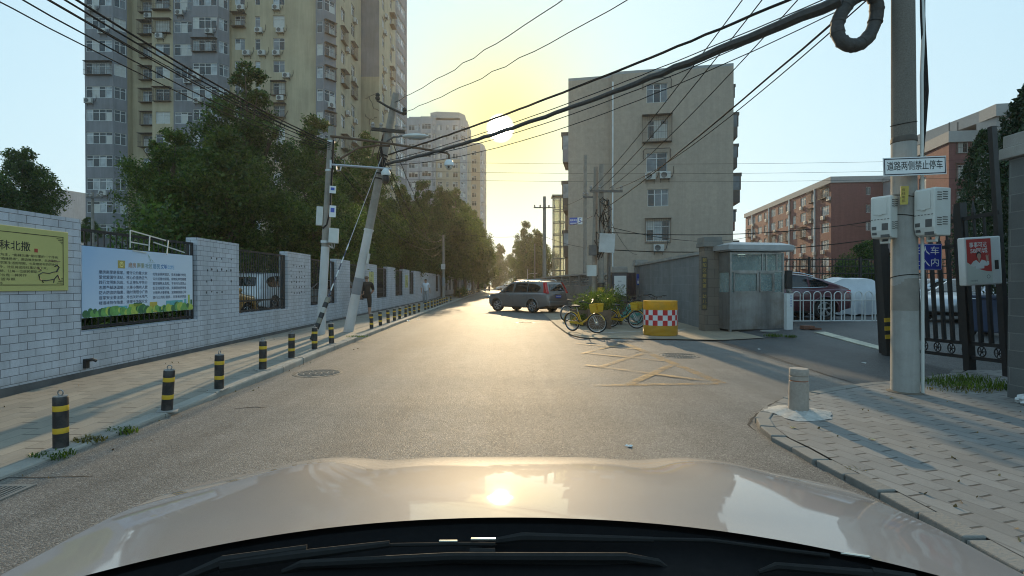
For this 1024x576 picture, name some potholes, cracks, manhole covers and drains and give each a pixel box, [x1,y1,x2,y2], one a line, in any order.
drain grate [0,484,37,501]
manhole cover [292,369,343,378]
